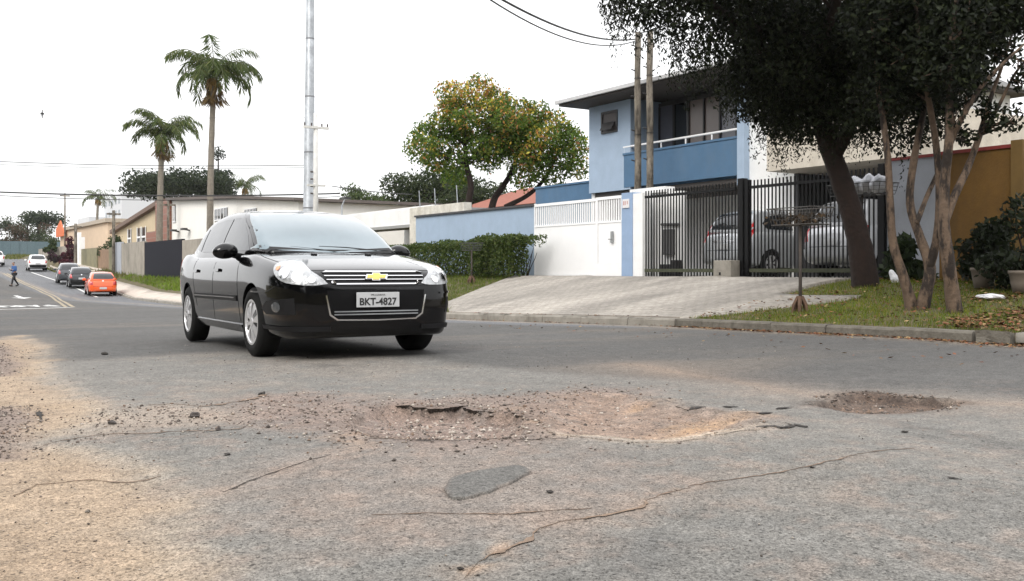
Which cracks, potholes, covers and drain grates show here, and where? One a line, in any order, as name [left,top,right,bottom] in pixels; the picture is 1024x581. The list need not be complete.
pothole [540,392,784,441]
pothole [804,392,960,414]
crack [223,455,328,492]
pothole [349,403,533,440]
crack [372,487,691,579]
crack [13,476,159,496]
